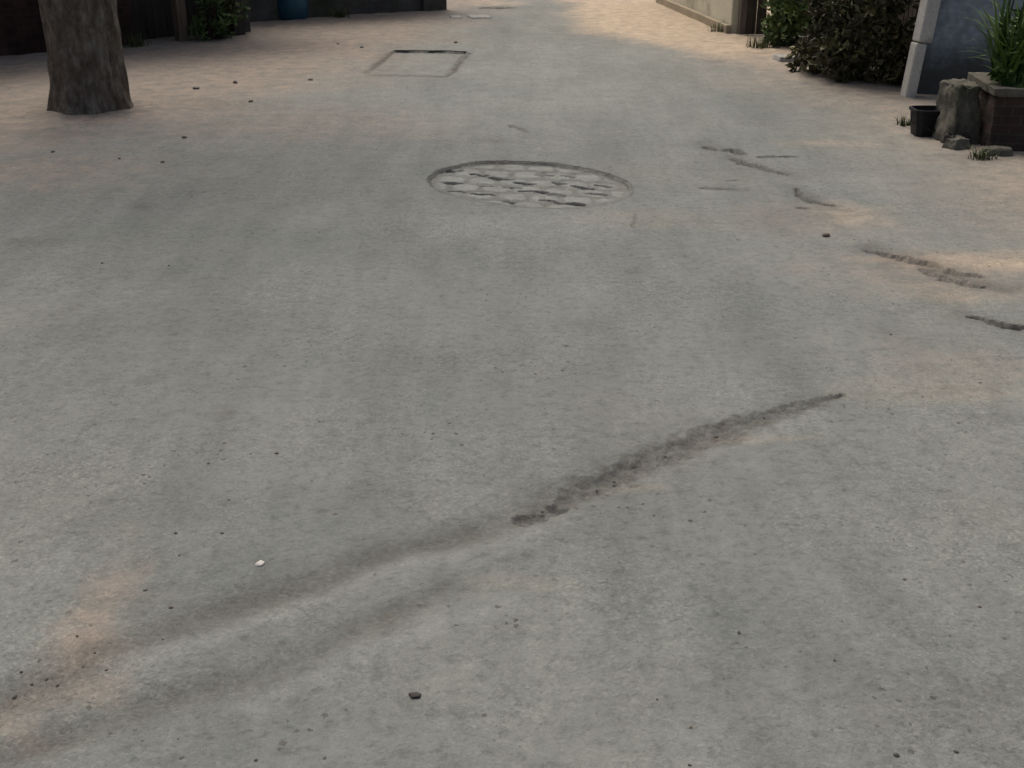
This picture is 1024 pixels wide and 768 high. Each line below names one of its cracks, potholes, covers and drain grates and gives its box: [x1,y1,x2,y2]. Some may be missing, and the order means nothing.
manhole cover [426,160,634,210]
crack [698,155,838,209]
crack [550,393,847,510]
manhole cover [366,50,467,76]
crack [965,315,1024,331]
crack [508,125,529,133]
crack [860,249,991,289]
